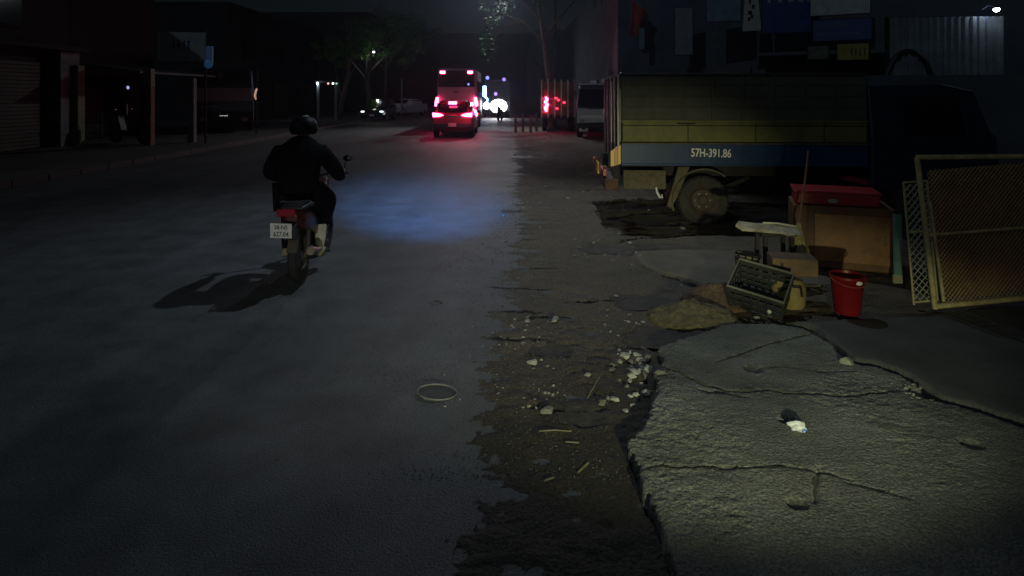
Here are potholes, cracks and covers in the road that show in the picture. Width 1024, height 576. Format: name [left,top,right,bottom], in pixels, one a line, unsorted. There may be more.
crack [649,465,910,502]
pothole [556,404,615,427]
pothole [528,342,574,358]
pothole [609,295,674,311]
pothole [788,498,810,510]
crack [666,334,900,397]
pothole [621,324,698,349]
